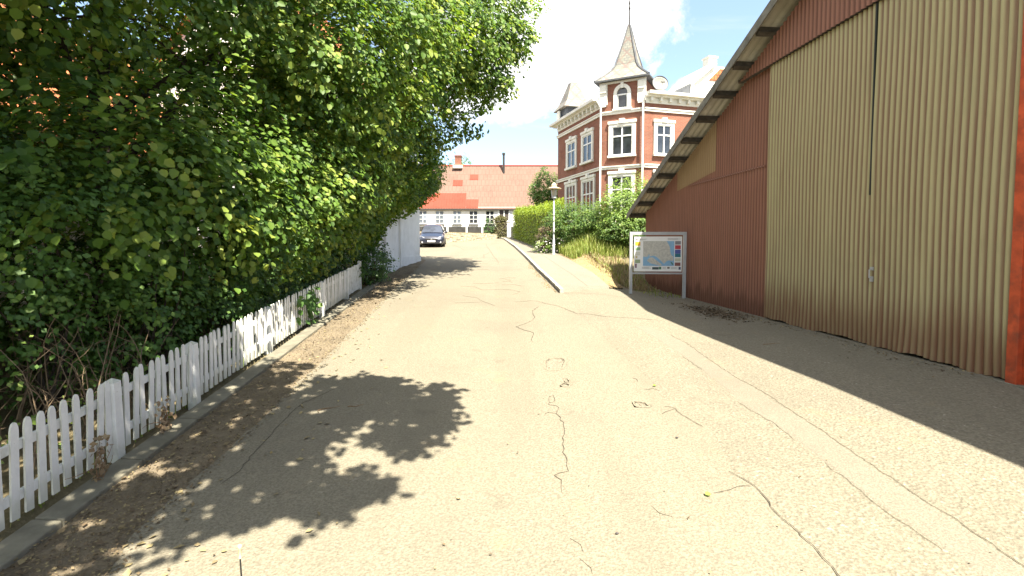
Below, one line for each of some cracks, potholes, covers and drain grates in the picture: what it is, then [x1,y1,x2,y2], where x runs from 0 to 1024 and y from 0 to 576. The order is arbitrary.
crack [670,334,1024,566]
crack [545,395,569,492]
crack [459,244,535,340]
